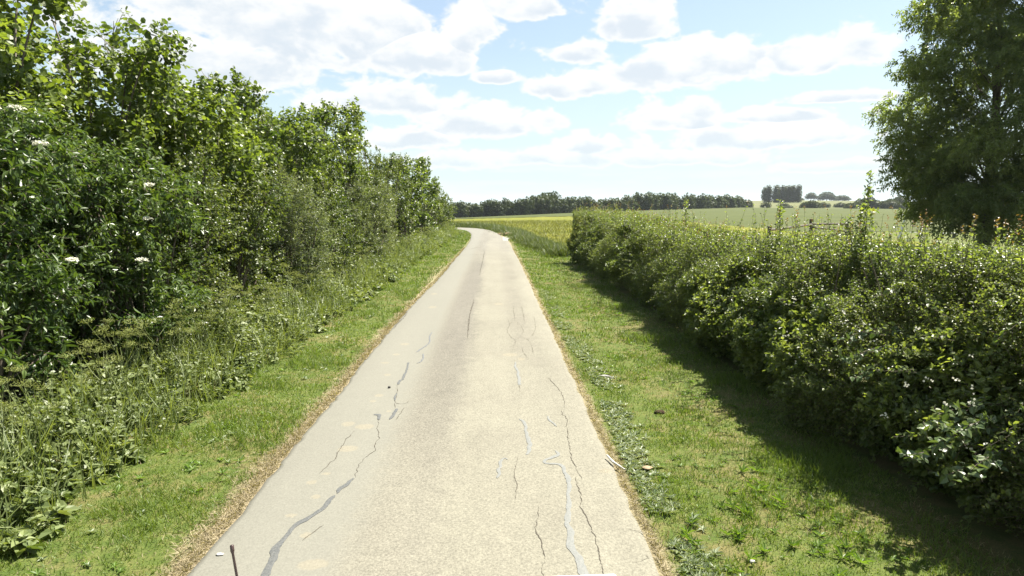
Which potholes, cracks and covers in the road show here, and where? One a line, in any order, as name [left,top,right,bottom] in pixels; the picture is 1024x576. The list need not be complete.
crack [551,381,604,574]
